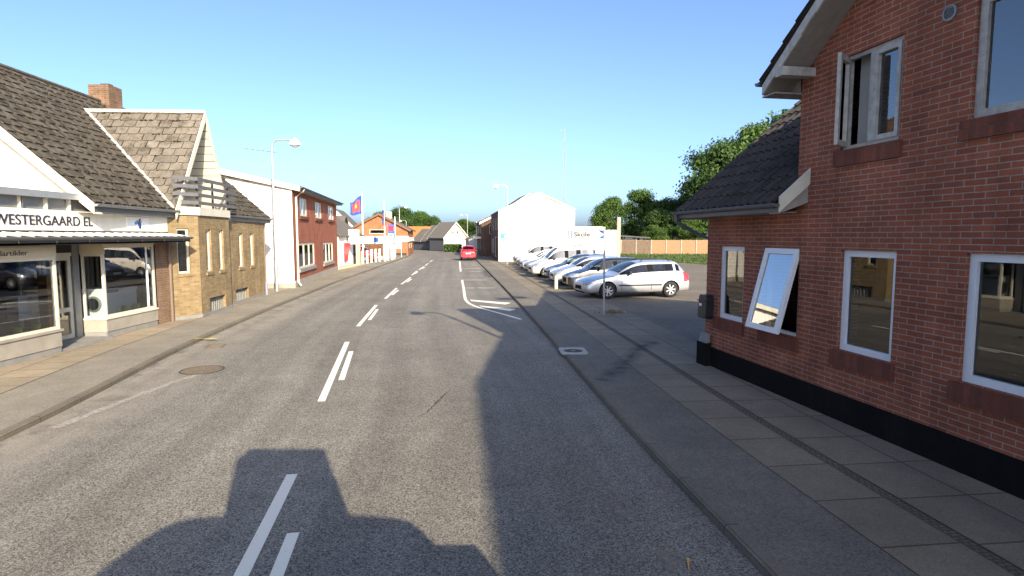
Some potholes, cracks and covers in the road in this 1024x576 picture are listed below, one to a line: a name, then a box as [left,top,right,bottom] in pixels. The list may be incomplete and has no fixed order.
manhole cover [178,365,225,375]
utility cover [558,347,589,355]
